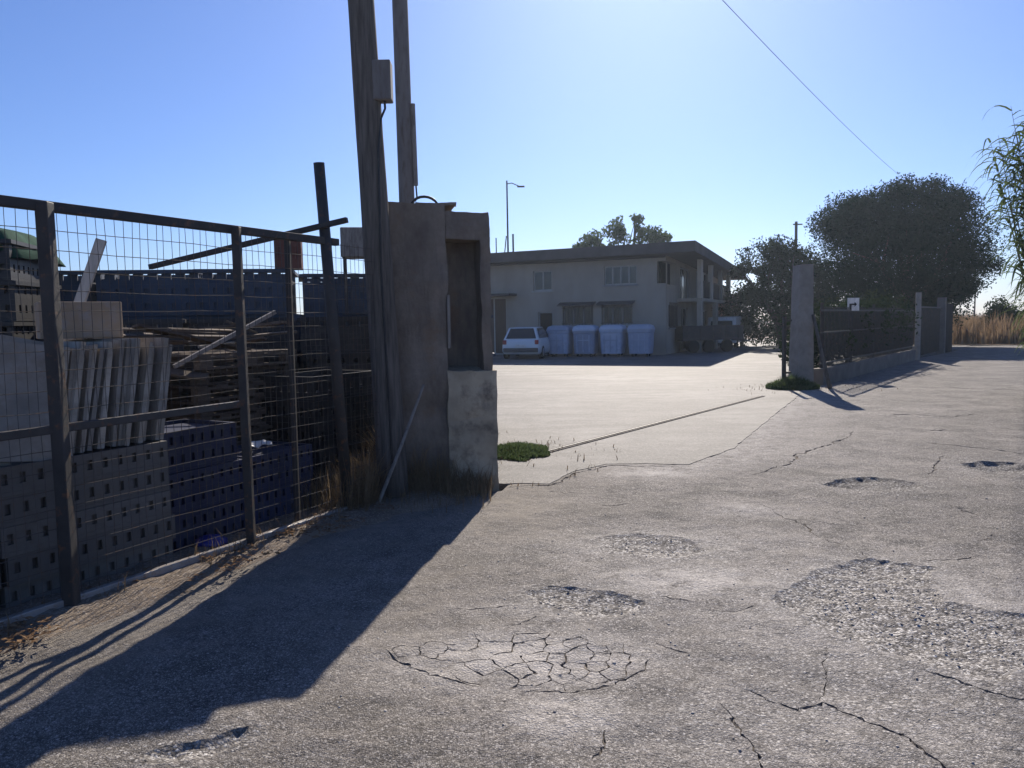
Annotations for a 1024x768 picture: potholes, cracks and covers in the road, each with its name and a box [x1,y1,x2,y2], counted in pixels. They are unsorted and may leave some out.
pothole [822,477,928,491]
crack [717,647,946,768]
crack [764,505,867,557]
crack [386,605,693,693]
pothole [522,585,651,619]
crack [885,414,1020,475]
crack [753,434,852,475]
crack [907,665,1024,700]
crack [592,730,606,759]
pothole [960,461,1024,473]
pothole [142,726,249,765]
